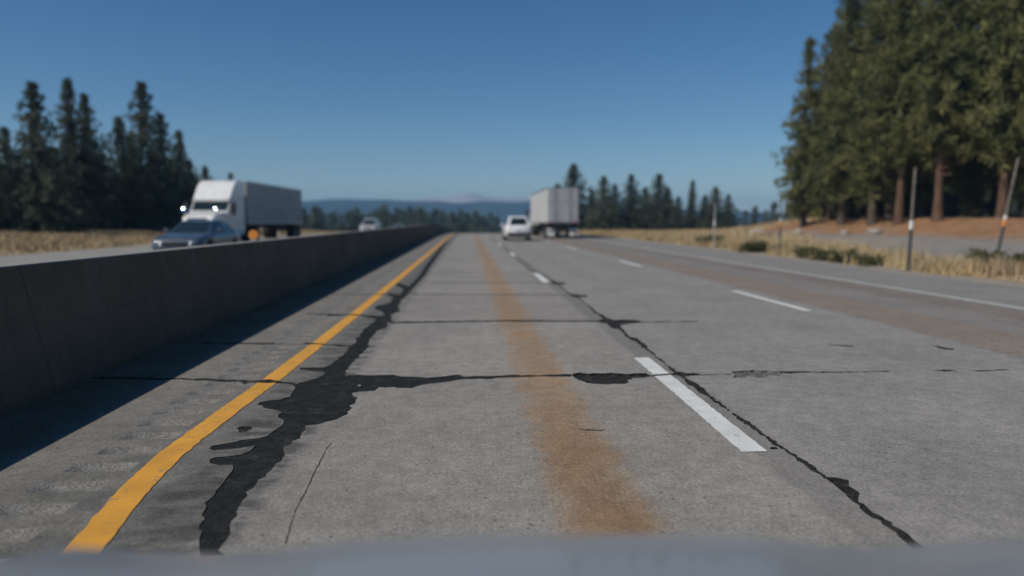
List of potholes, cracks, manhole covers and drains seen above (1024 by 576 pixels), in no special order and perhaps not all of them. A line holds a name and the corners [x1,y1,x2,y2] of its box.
crack [346,250,920,545]
crack [285,442,332,544]
